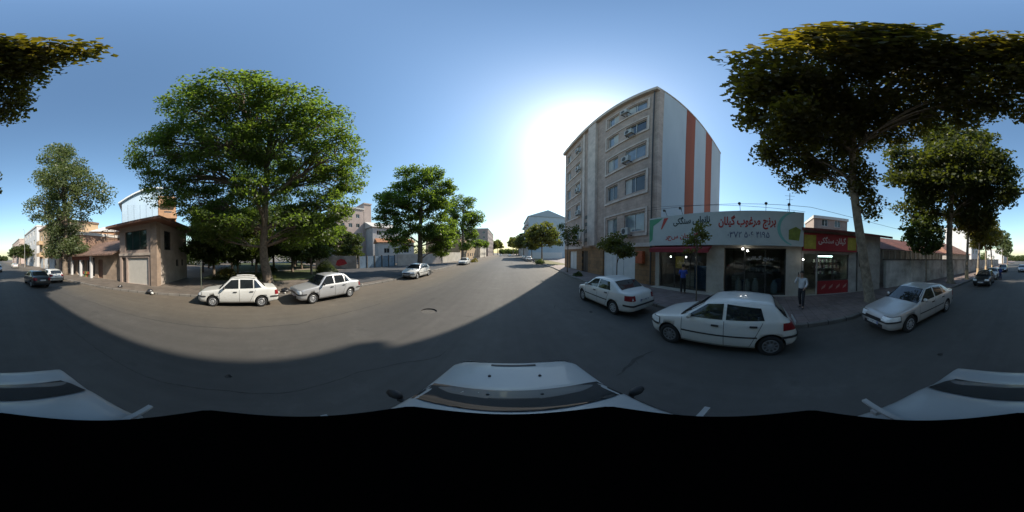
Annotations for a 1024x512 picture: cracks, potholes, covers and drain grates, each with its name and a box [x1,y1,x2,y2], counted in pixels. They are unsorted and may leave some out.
crack [616,350,655,376]
